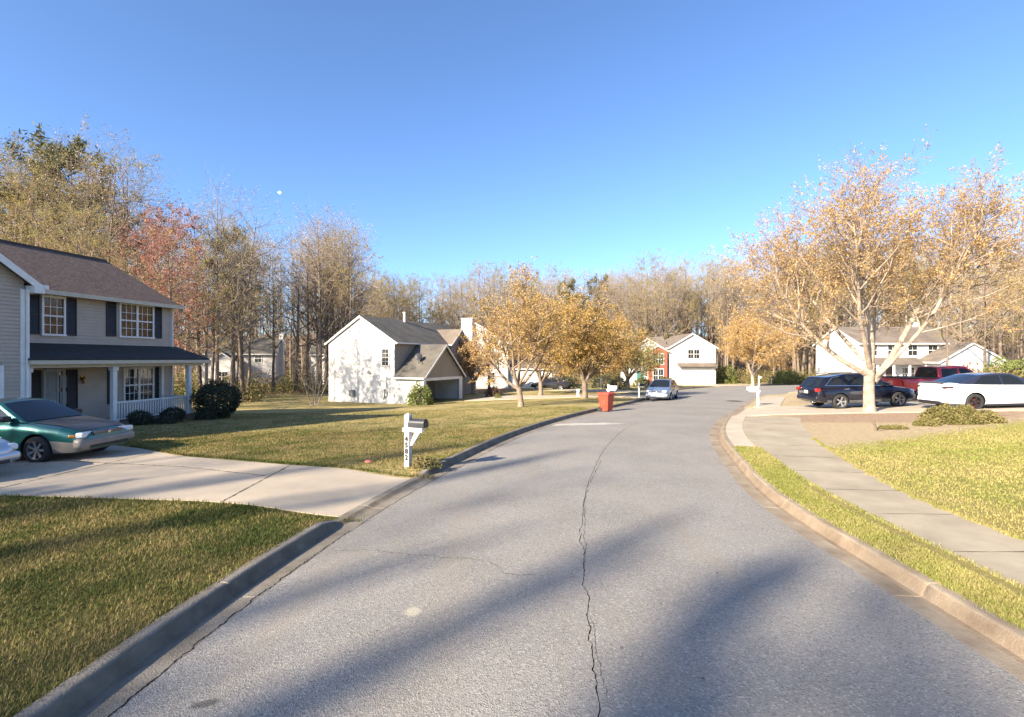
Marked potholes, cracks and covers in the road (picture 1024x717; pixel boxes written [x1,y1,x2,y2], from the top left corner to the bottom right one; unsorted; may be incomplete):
crack [579,431,622,717]
